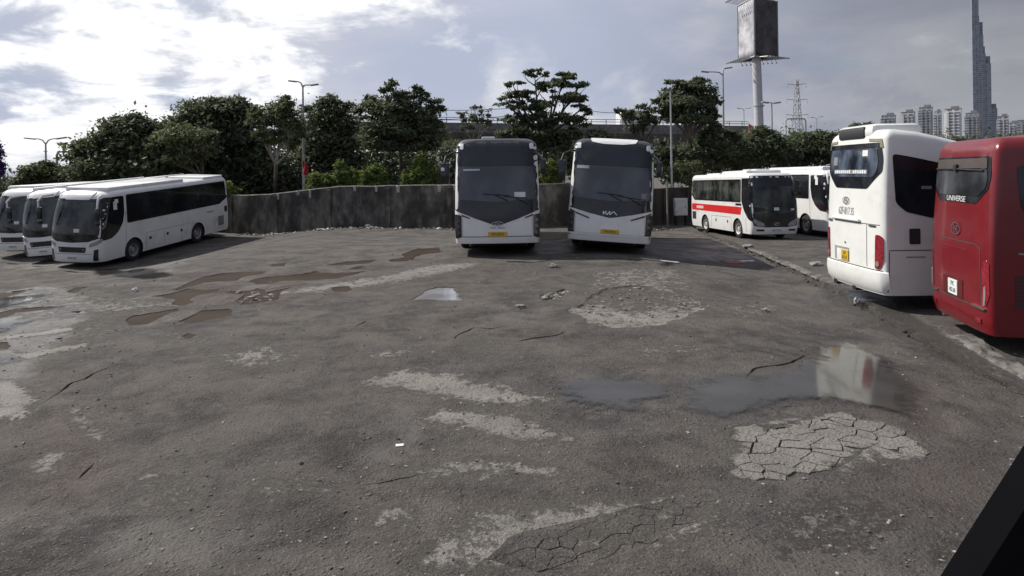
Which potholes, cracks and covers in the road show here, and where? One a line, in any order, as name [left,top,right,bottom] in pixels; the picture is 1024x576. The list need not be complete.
pothole [228,287,290,305]
crack [746,355,804,377]
pothole [152,288,220,306]
pothole [567,285,709,328]
crack [45,363,122,402]
crack [454,326,565,342]
pothole [412,287,463,300]
crack [484,406,933,574]
pothole [179,309,233,323]
pothole [126,308,180,325]
pothole [248,271,364,284]
